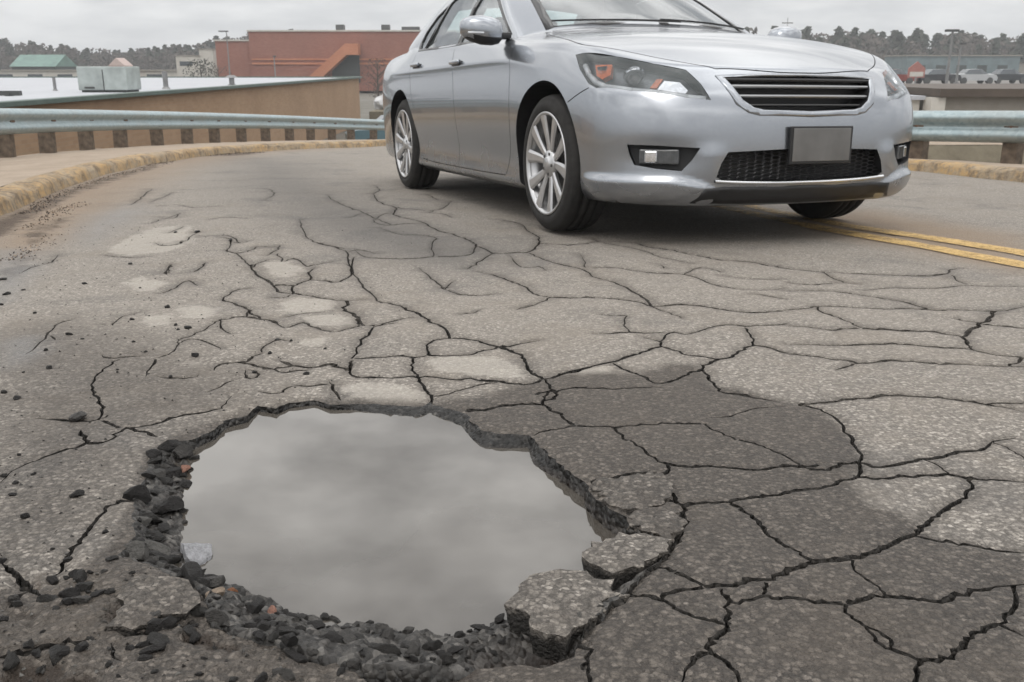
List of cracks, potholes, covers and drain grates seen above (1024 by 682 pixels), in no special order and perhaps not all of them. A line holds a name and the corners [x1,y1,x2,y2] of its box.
pothole [117,400,662,682]
crack [0,185,1024,682]
